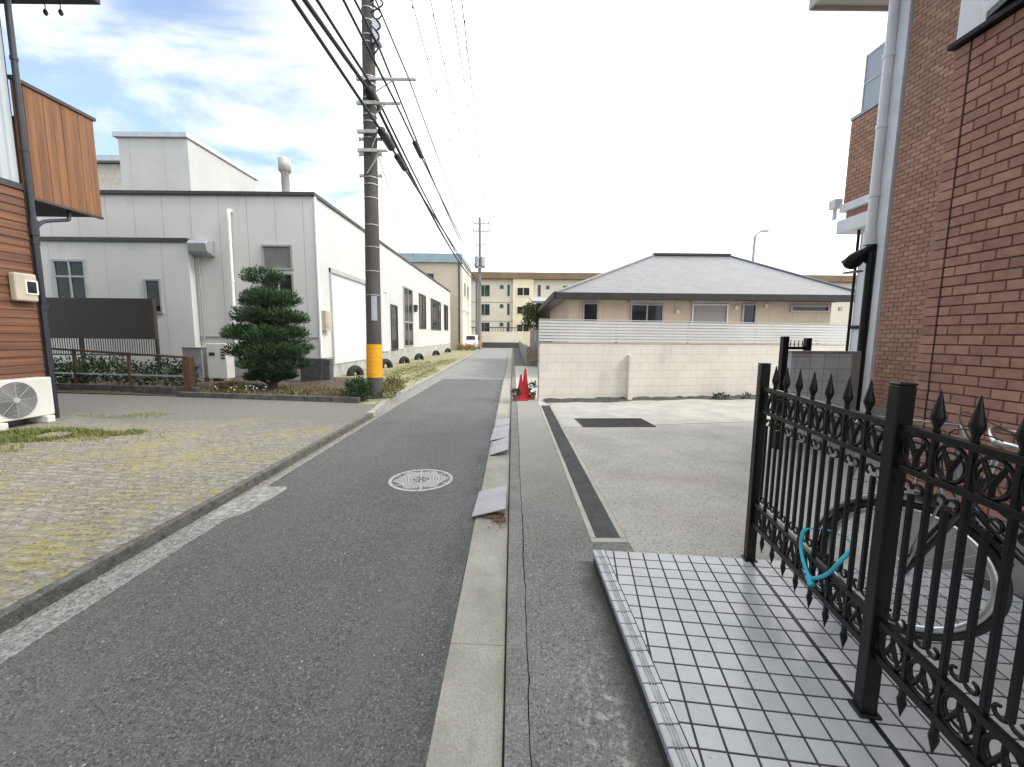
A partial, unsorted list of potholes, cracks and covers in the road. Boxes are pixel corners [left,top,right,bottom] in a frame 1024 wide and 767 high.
manhole cover [388,469,453,492]
crack [517,406,532,767]
